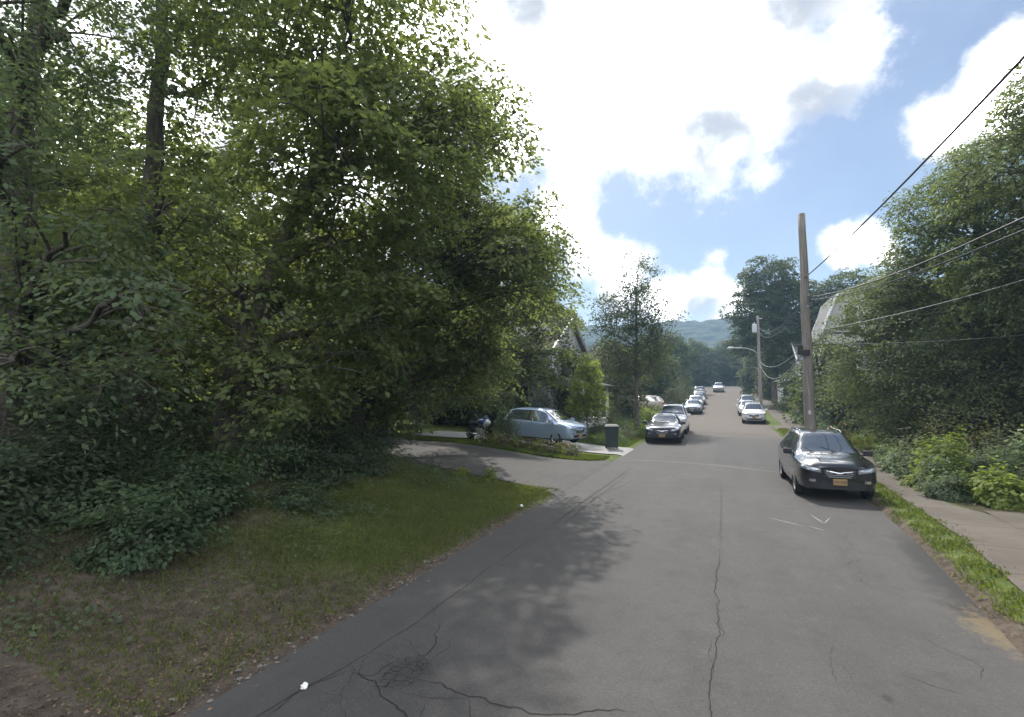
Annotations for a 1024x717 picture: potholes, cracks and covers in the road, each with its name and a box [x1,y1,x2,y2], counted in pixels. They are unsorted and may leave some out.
crack [708,488,725,717]
crack [268,609,643,717]
